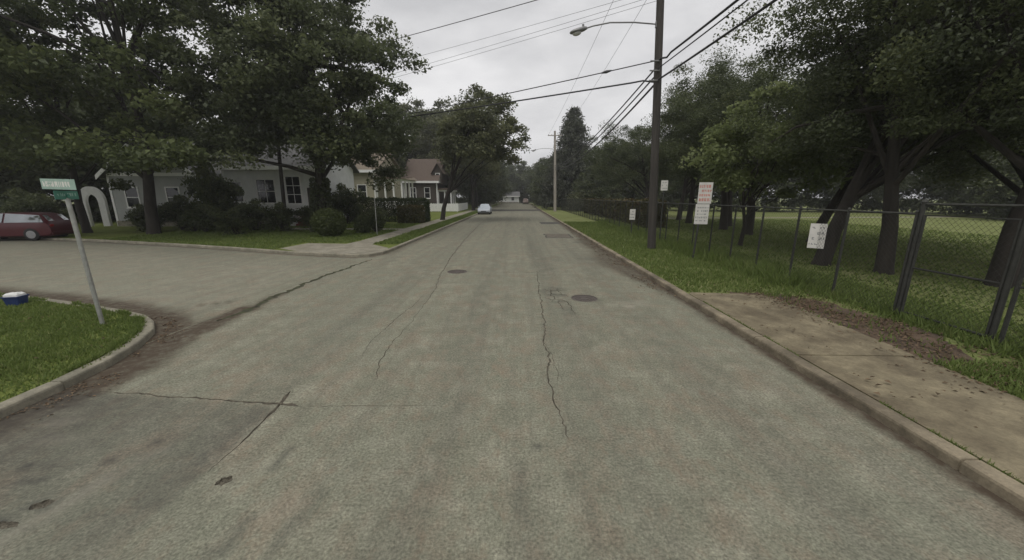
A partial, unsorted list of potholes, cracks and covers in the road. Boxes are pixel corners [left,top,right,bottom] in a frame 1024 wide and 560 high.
pothole [0,521,19,529]
crack [216,259,372,321]
crack [537,272,575,439]
pothole [29,499,55,510]
